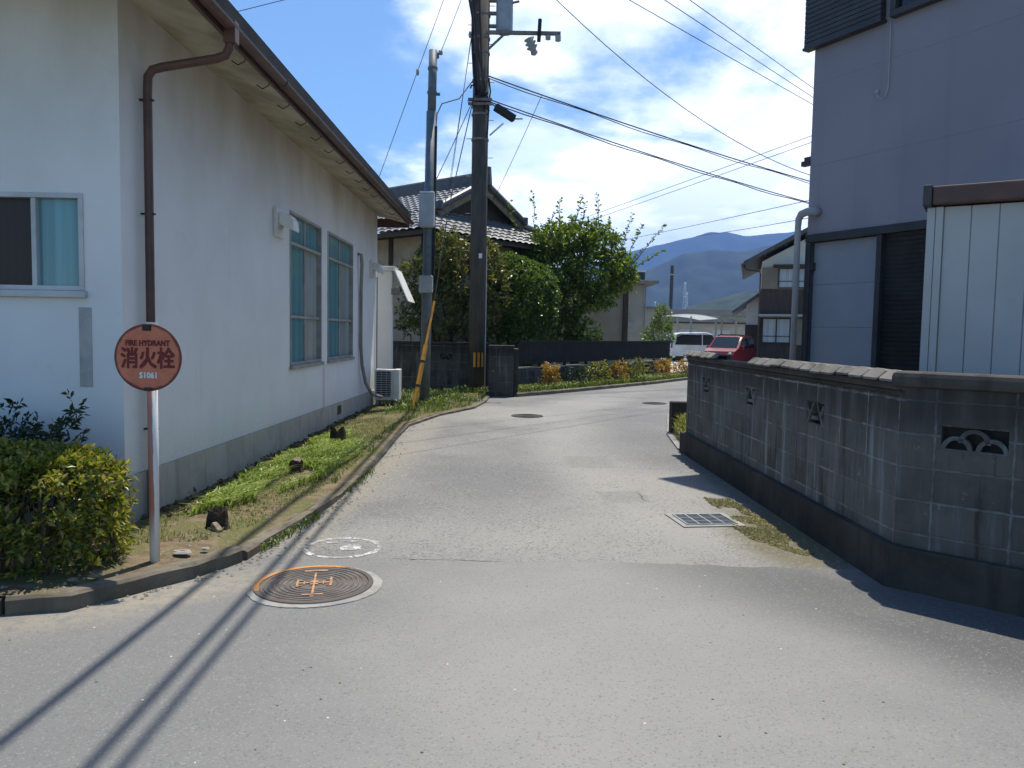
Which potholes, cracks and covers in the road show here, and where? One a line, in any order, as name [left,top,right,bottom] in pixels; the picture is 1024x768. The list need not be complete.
manhole cover [247,565,383,609]
drain grate [665,513,746,528]
